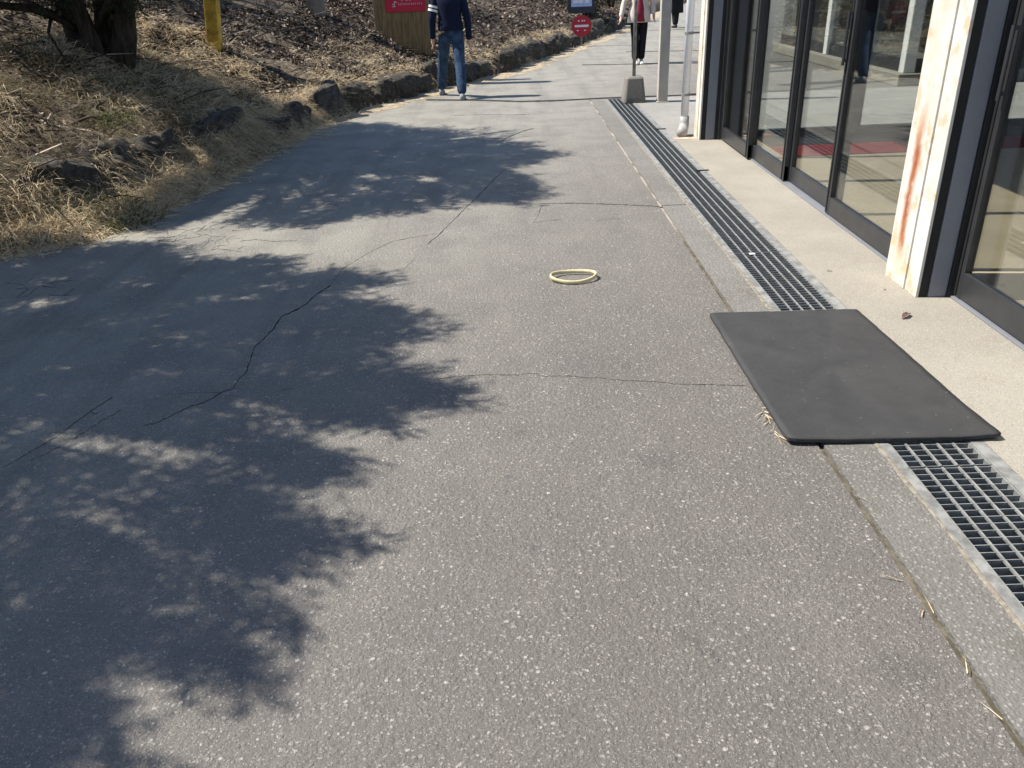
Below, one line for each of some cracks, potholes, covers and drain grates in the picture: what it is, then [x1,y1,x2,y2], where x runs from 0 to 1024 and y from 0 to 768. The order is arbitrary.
crack [154,219,297,252]
crack [143,234,432,426]
crack [439,374,744,386]
drain grate [668,171,733,207]
drain grate [634,130,677,149]
drain grate [888,440,991,469]
drain grate [619,112,659,131]
crack [408,173,501,265]
drain grate [733,251,837,311]
drain grate [648,148,700,173]
drain grate [696,205,779,254]
drain grate [909,465,1024,608]
